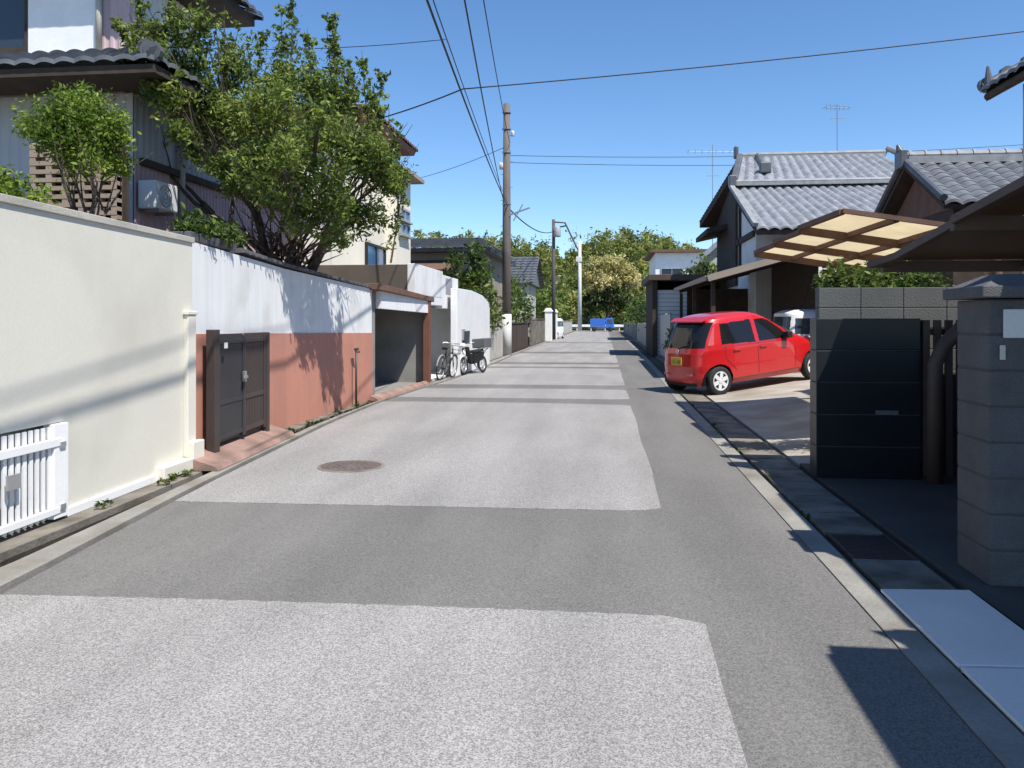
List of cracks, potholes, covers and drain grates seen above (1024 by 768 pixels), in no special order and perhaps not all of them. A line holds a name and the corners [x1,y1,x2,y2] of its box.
manhole cover [317,460,385,473]
drain grate [826,533,918,561]
